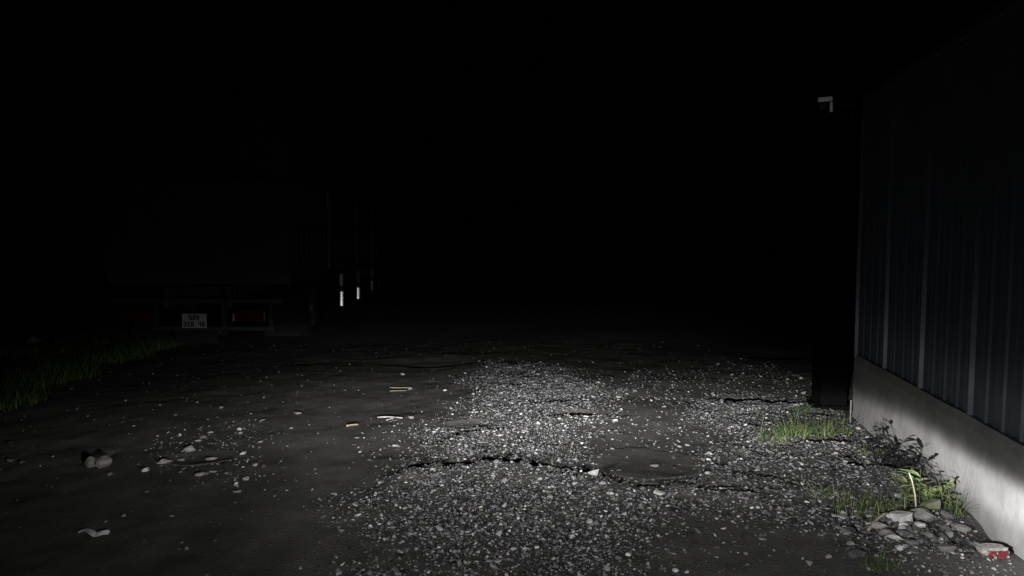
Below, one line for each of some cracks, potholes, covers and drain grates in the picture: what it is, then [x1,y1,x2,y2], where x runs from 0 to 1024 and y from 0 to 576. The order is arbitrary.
pothole [434,418,510,430]
pothole [553,408,607,416]
pothole [586,447,705,481]
